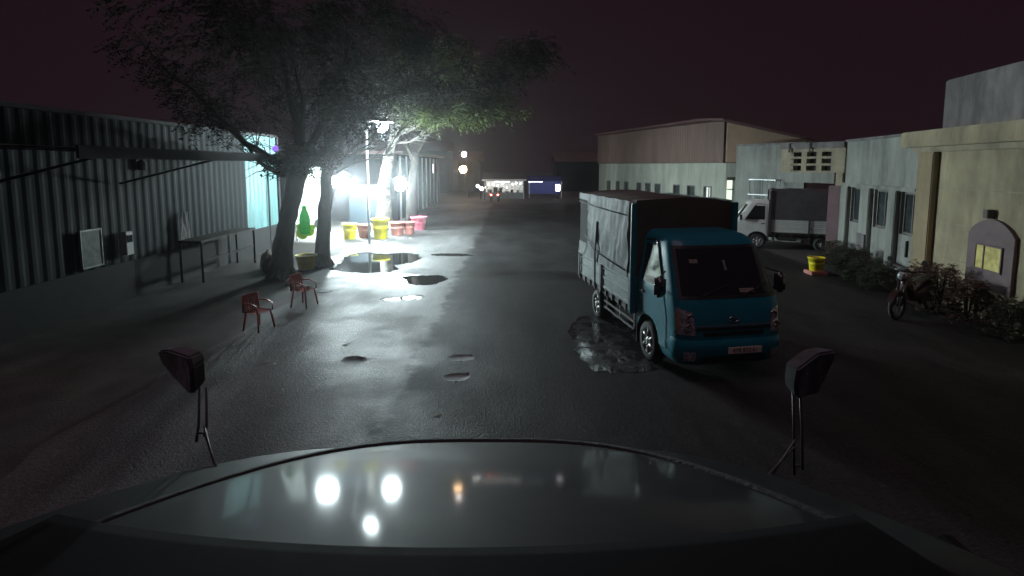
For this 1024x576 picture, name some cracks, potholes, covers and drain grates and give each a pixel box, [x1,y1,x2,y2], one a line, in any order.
pothole [443,372,471,382]
pothole [341,355,367,364]
pothole [447,354,475,362]
pothole [327,252,423,273]
pothole [401,275,448,285]
